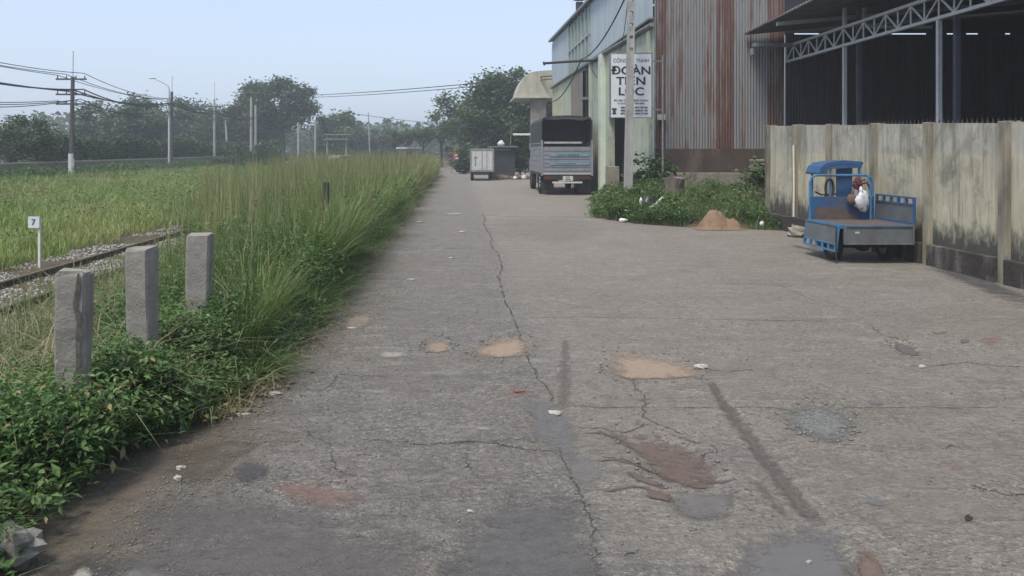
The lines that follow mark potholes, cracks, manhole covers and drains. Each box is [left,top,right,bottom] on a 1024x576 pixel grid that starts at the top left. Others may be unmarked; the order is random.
crack [579,378,683,434]
pothole [884,336,931,359]
crack [364,436,616,576]
crack [482,214,554,400]
